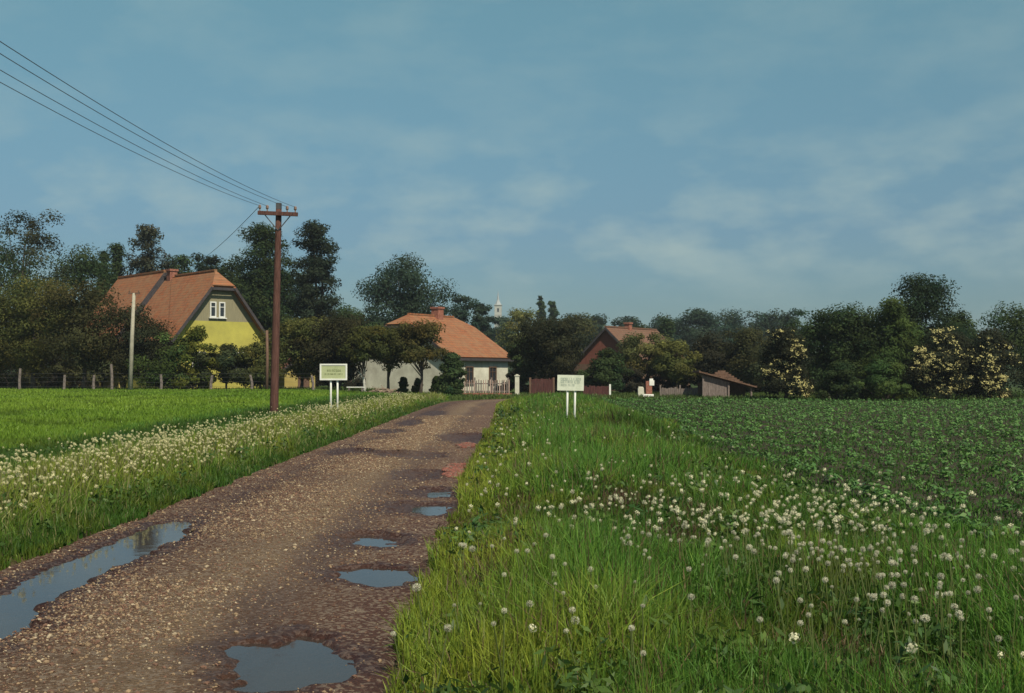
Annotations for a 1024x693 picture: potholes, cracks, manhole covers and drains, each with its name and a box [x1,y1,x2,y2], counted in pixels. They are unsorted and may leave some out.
pothole [210,624,371,693]
pothole [377,500,458,516]
pothole [321,562,425,589]
pothole [330,529,417,549]
pothole [0,520,205,646]
pothole [399,486,457,498]
